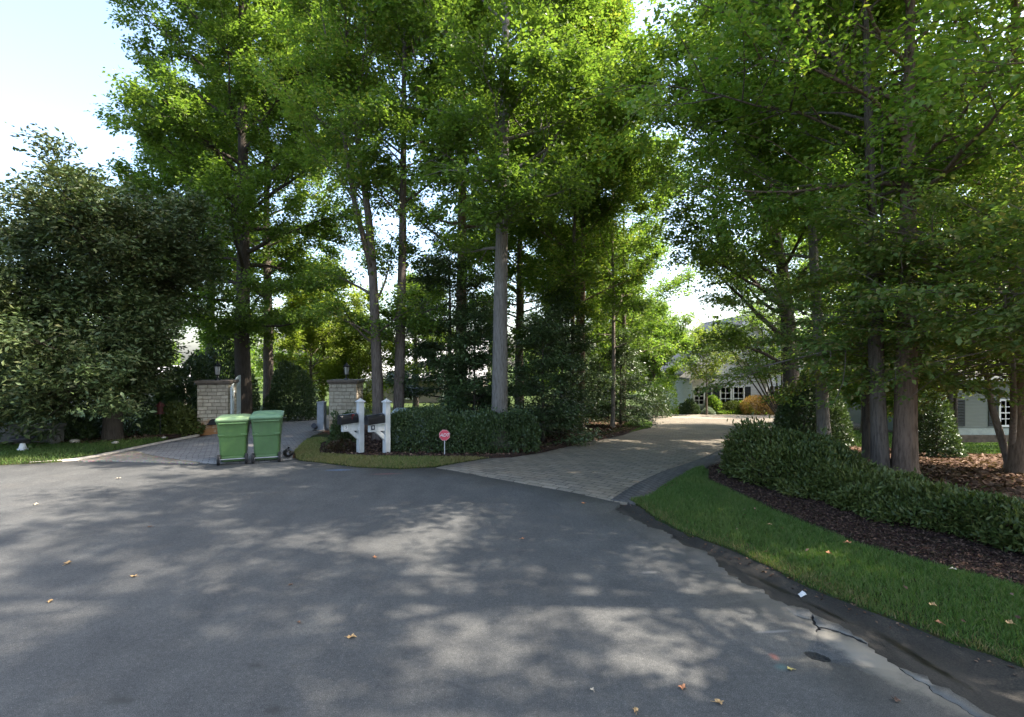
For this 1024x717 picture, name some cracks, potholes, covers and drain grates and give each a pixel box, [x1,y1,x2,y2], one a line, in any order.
pothole [804,652,831,662]
crack [798,616,867,644]
